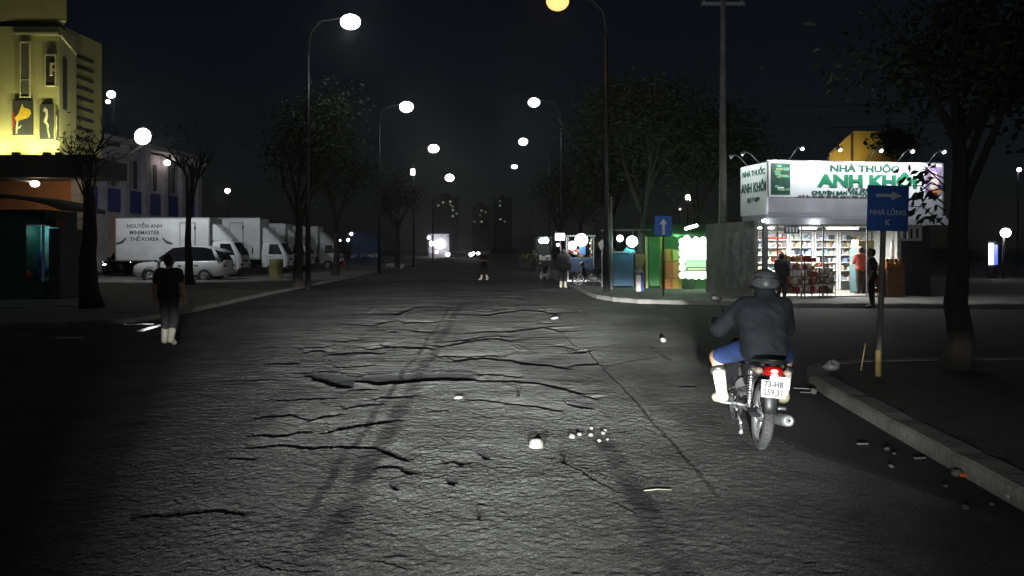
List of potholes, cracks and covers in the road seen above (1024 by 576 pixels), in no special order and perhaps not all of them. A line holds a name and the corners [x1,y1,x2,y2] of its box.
crack [129,508,256,520]
crack [476,506,484,521]
pothole [304,372,356,389]
crack [228,296,719,514]
